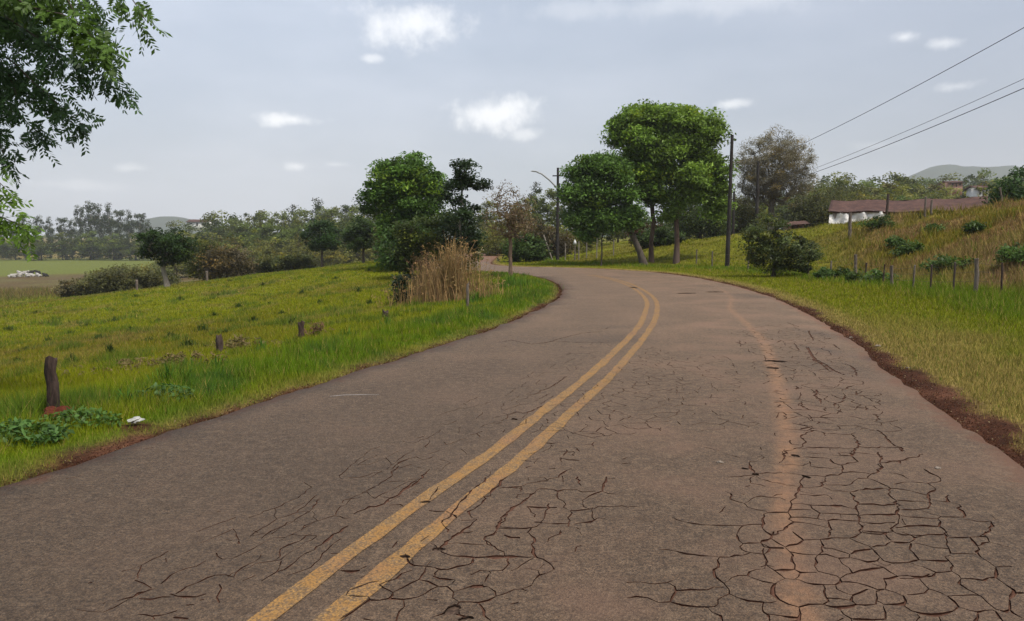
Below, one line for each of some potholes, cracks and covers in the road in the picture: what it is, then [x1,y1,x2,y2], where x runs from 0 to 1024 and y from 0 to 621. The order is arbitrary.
crack [627,323,1024,621]
crack [77,328,683,621]
